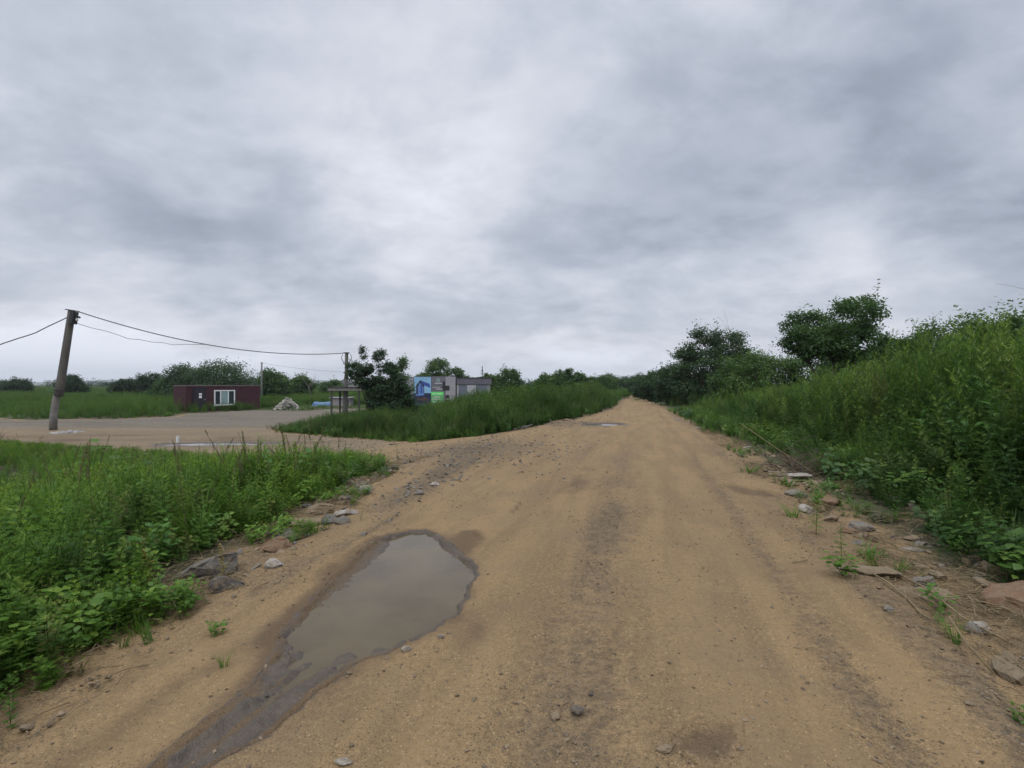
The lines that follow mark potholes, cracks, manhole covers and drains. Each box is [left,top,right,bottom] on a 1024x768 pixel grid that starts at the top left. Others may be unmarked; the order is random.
pothole [150,529,479,768]
